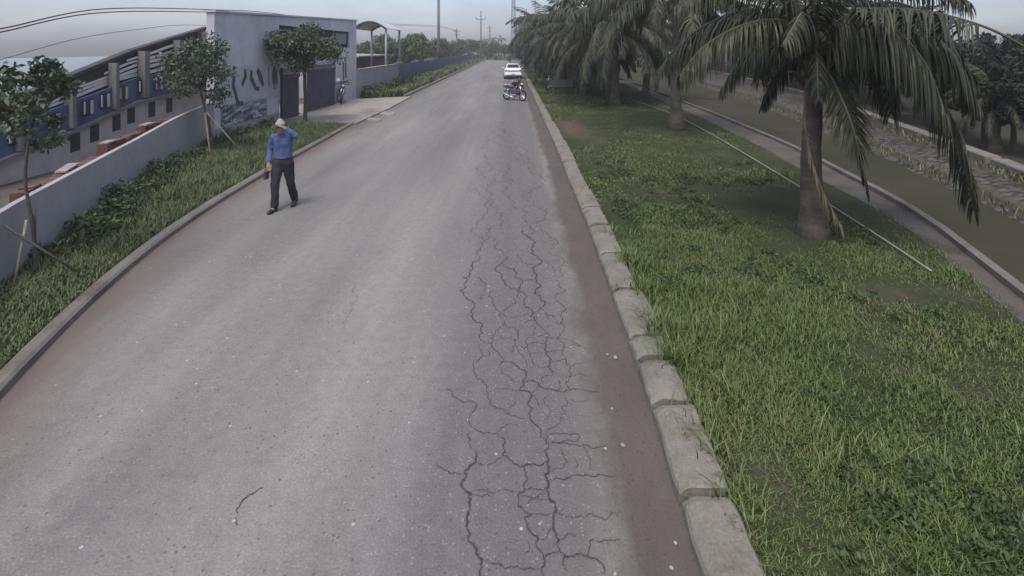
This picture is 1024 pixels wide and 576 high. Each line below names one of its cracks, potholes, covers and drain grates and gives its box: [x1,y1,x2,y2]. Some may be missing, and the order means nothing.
crack [436,125,619,576]
